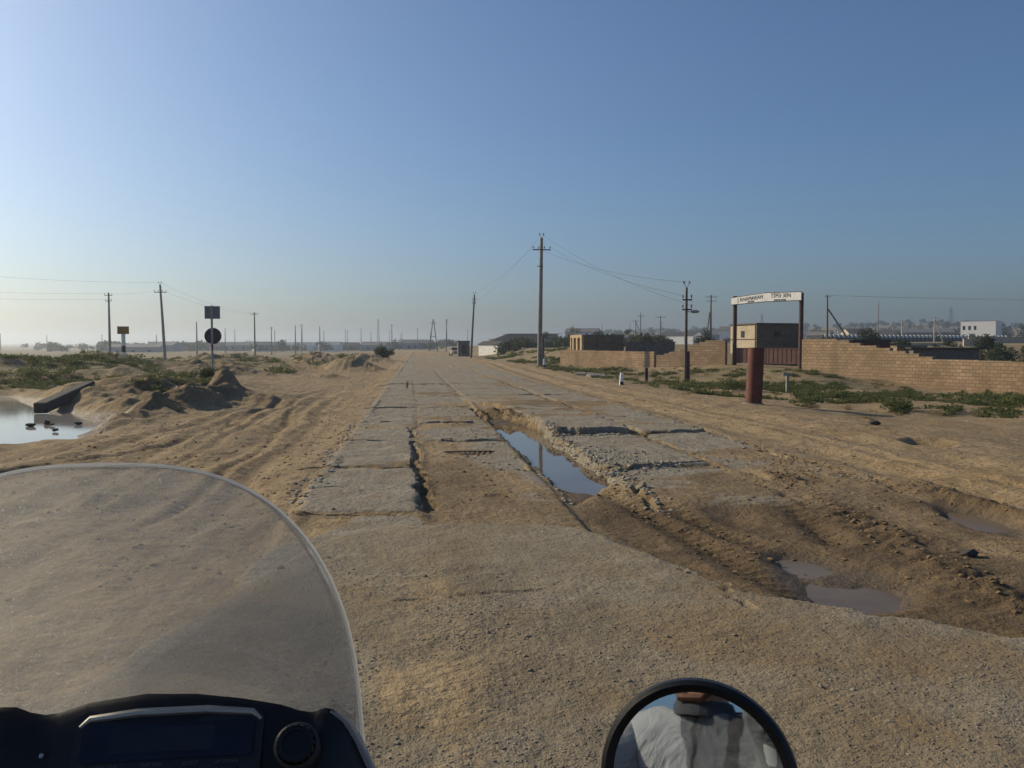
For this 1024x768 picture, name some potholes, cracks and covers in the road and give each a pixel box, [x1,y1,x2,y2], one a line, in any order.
pothole [743,543,942,617]
pothole [913,492,1024,541]
pothole [485,410,615,506]
